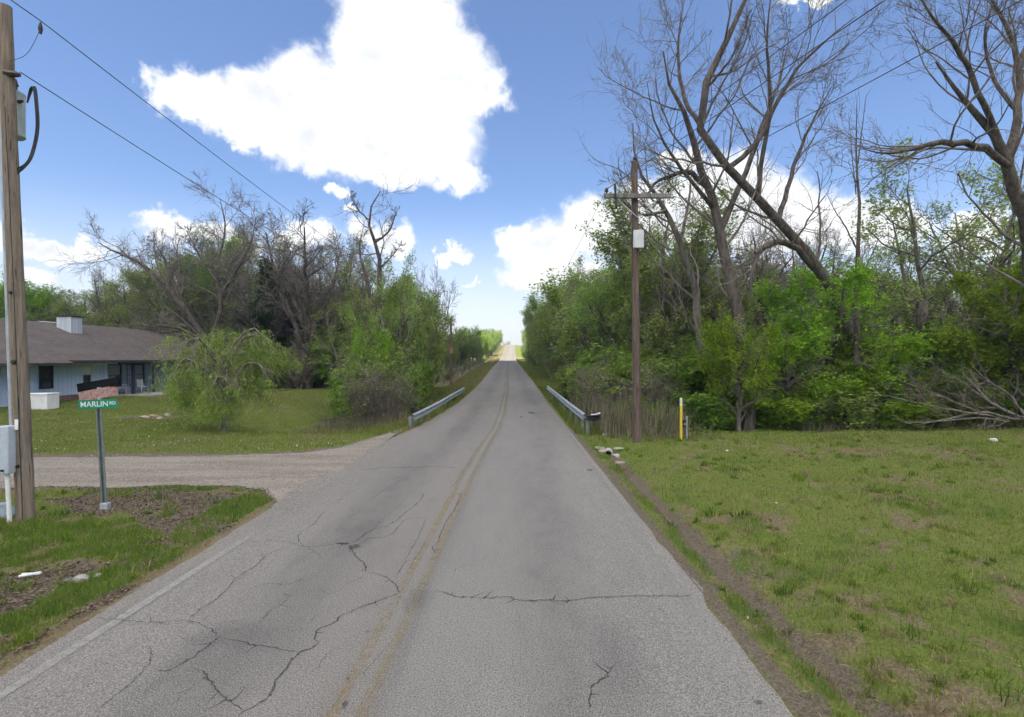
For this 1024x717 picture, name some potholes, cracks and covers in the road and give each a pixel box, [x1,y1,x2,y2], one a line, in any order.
crack [586,661,617,715]
crack [67,448,478,716]
crack [435,590,697,604]
